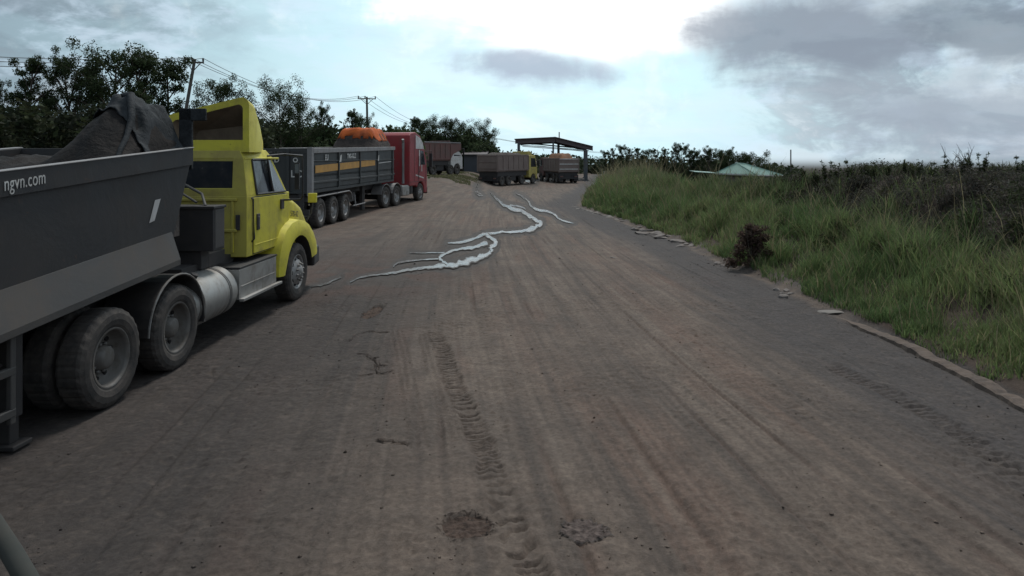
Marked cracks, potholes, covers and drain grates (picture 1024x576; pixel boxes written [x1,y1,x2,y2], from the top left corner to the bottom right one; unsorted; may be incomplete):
pothole [557,517,622,548]
crack [349,331,389,377]
pothole [360,302,388,321]
pothole [433,509,498,542]
